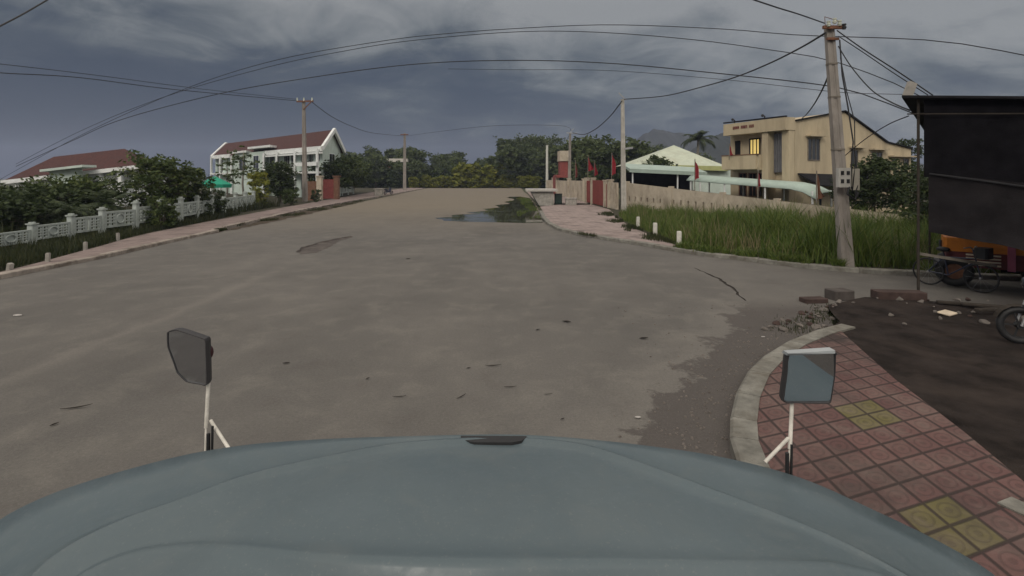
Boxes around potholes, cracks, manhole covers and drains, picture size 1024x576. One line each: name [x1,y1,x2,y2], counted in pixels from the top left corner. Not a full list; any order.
pothole [296,236,353,254]
crack [695,268,746,301]
